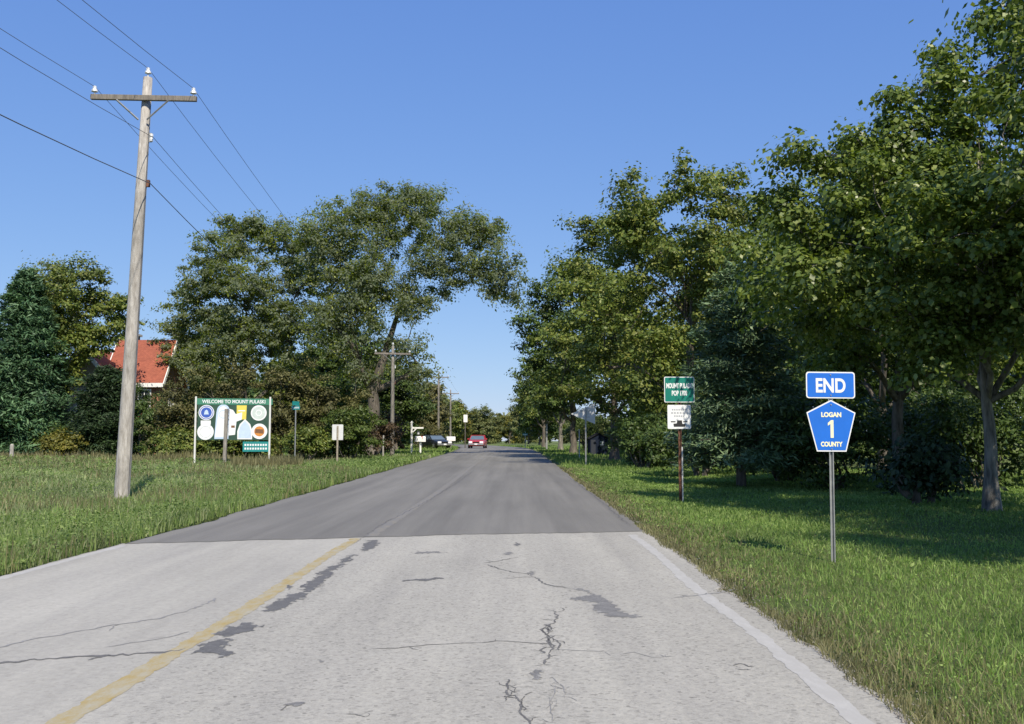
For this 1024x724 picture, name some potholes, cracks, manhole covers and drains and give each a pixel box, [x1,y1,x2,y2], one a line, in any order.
crack [375,607,668,724]
crack [486,557,566,588]
crack [1,598,217,647]
